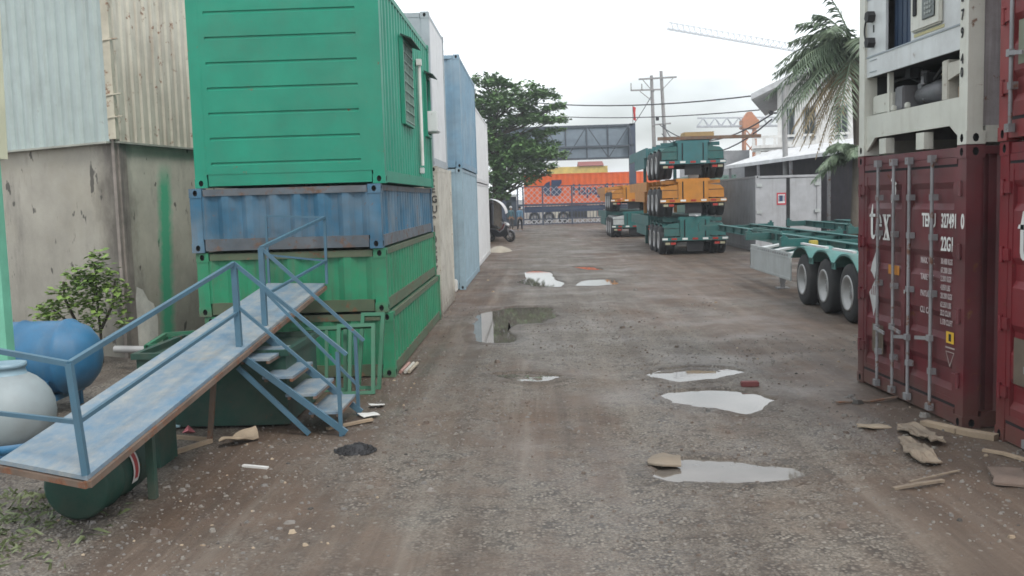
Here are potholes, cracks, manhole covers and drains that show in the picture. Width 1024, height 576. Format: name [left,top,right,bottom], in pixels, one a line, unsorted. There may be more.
pothole [478,369,576,385]
pothole [568,278,626,287]
pothole [508,270,571,288]
pothole [642,385,797,418]
pothole [460,305,568,345]
pothole [620,451,837,491]
pothole [630,363,767,385]
